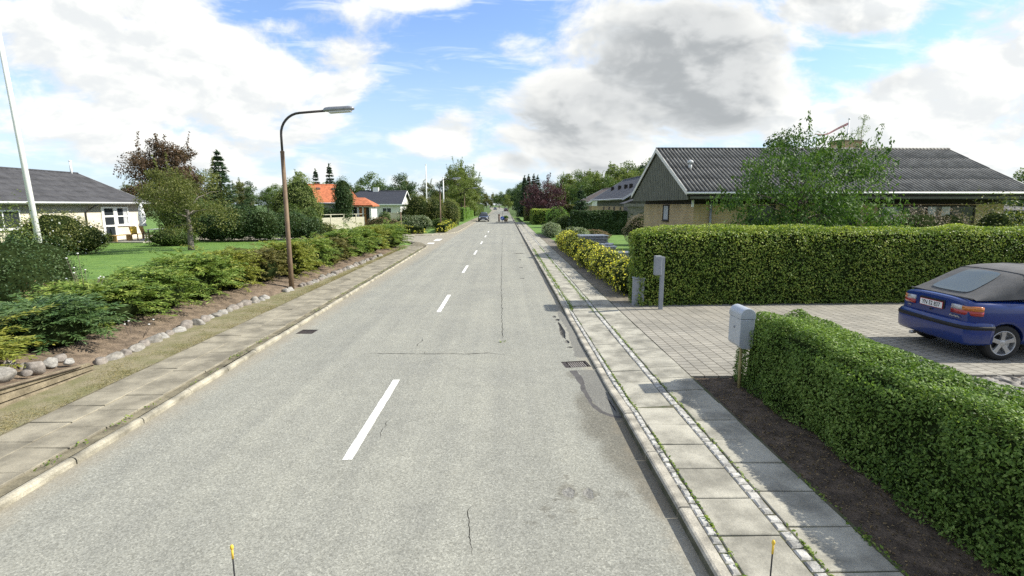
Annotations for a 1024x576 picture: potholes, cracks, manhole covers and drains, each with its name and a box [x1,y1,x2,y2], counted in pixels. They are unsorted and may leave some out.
crack [377,260,503,355]
